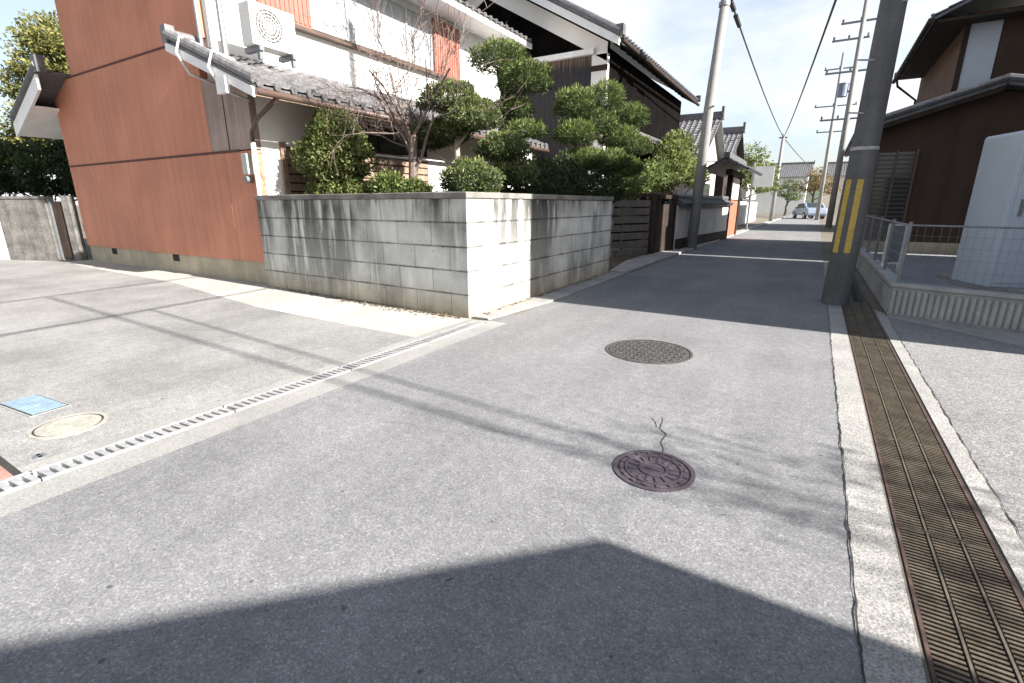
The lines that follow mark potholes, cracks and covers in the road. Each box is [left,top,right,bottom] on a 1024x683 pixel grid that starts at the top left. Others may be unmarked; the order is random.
drain grate [223,366,351,412]
drain grate [873,435,997,550]
manhole cover [613,450,696,492]
manhole cover [606,339,693,364]
manhole cover [26,412,108,440]
drain grate [861,385,944,448]
drain grate [844,313,885,334]
drain grate [339,340,429,371]
drain grate [842,302,875,316]
drain grate [853,352,915,393]
drain grate [31,406,235,481]
